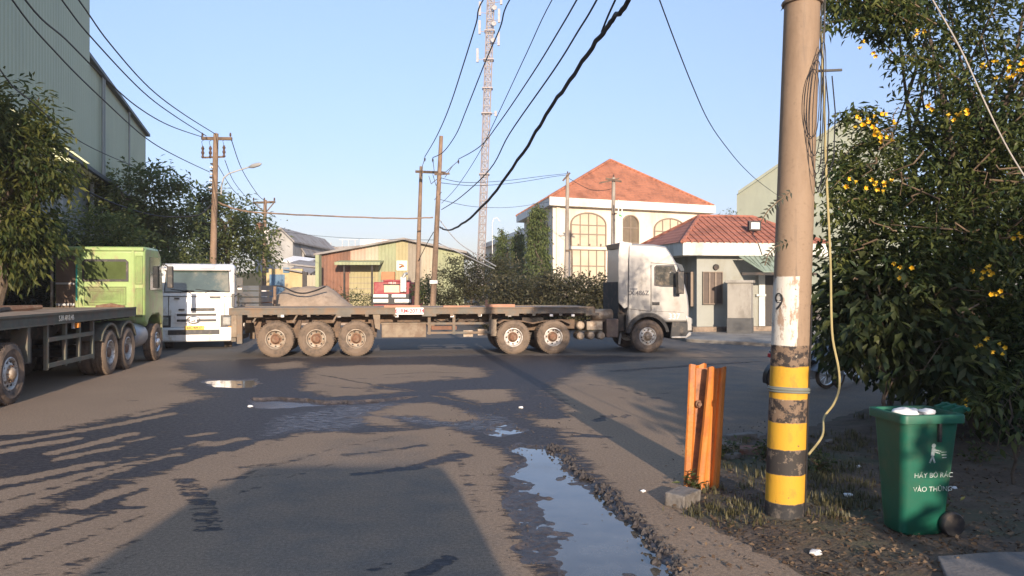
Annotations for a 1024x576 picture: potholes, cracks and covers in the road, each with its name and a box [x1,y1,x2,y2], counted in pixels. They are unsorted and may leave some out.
crack [317,372,463,391]
pothole [498,442,685,576]
pothole [199,378,263,387]
